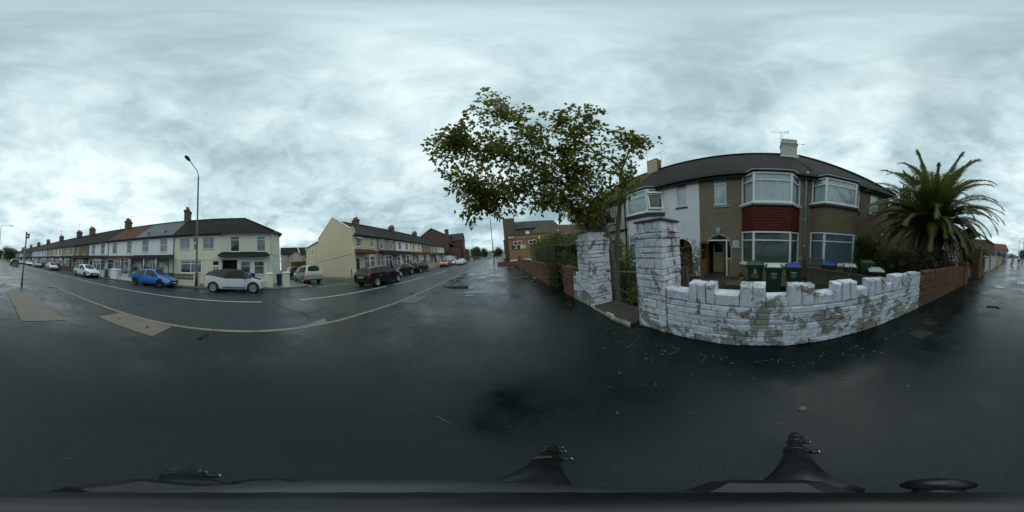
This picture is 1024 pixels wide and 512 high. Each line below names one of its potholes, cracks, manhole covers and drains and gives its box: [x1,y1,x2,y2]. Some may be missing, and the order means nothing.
manhole cover [909,329,933,340]
crack [271,293,346,321]
